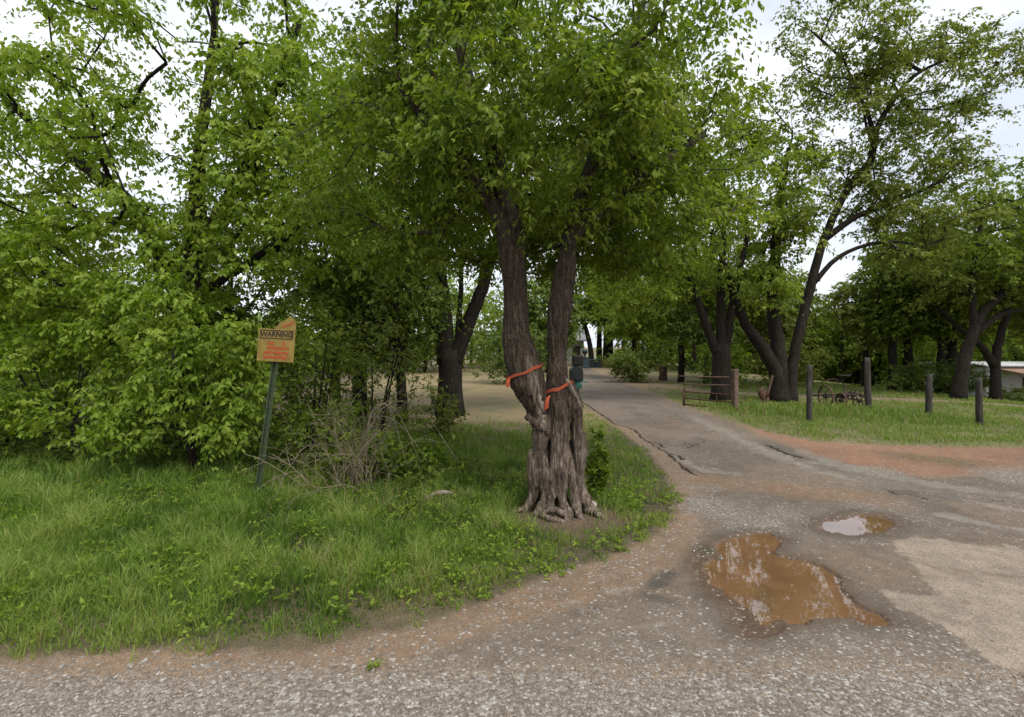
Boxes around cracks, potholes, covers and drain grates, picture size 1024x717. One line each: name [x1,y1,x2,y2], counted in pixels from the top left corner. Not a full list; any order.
crack [759,443,806,459]
crack [882,490,932,500]
pothole [811,511,904,539]
crack [582,400,707,477]
pothole [685,529,898,642]
